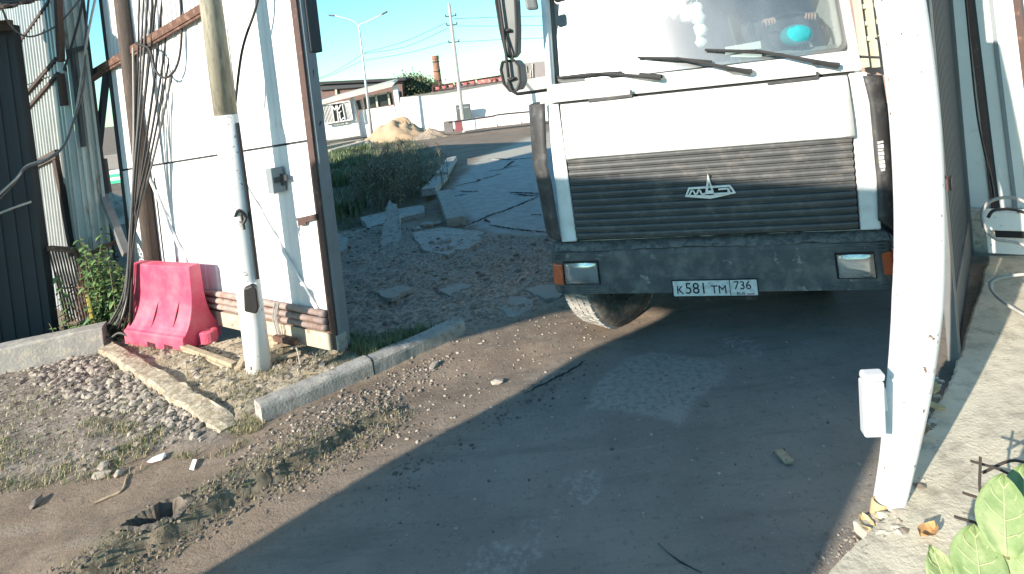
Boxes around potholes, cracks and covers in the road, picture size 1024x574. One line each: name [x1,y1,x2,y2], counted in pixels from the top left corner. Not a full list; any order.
crack [524,360,586,395]
crack [454,158,547,234]
pothole [114,495,193,532]
